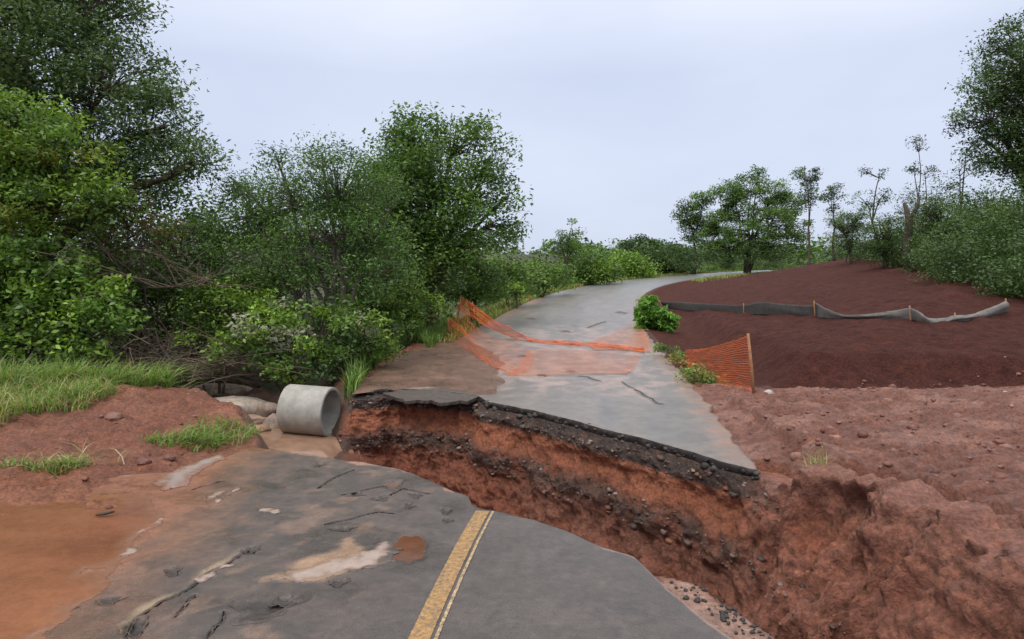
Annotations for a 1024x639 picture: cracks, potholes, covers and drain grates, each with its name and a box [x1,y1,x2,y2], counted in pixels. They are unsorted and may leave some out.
crack [621,381,664,404]
pothole [390,533,429,564]
crack [123,549,249,639]
crack [317,469,429,525]
